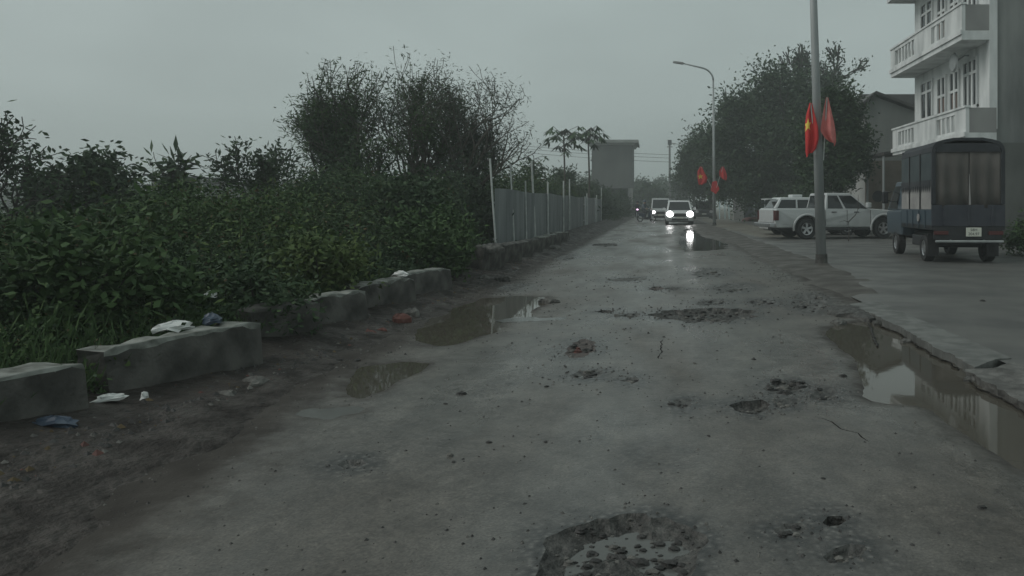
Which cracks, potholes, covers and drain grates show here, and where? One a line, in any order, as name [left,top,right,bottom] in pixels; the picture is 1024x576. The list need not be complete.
pothole [823,516,847,526]
pothole [337,459,366,469]
pothole [729,399,770,414]
pothole [647,308,759,323]
pothole [536,513,709,576]
pothole [565,339,597,358]
pothole [823,544,866,563]
pothole [571,369,604,380]
pothole [763,378,808,395]
